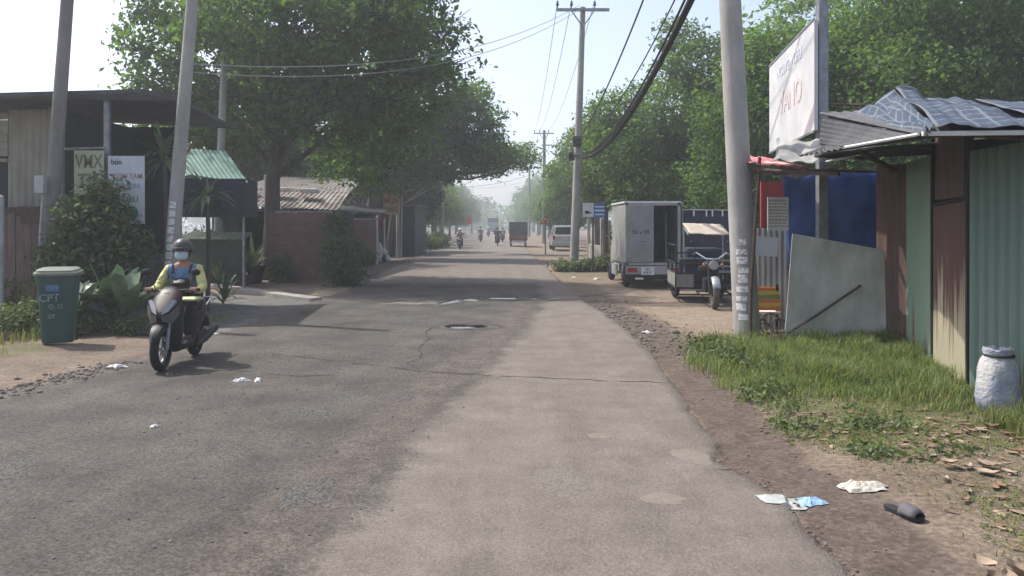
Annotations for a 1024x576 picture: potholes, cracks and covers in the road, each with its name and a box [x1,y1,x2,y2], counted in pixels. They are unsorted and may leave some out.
crack [261,327,663,383]
